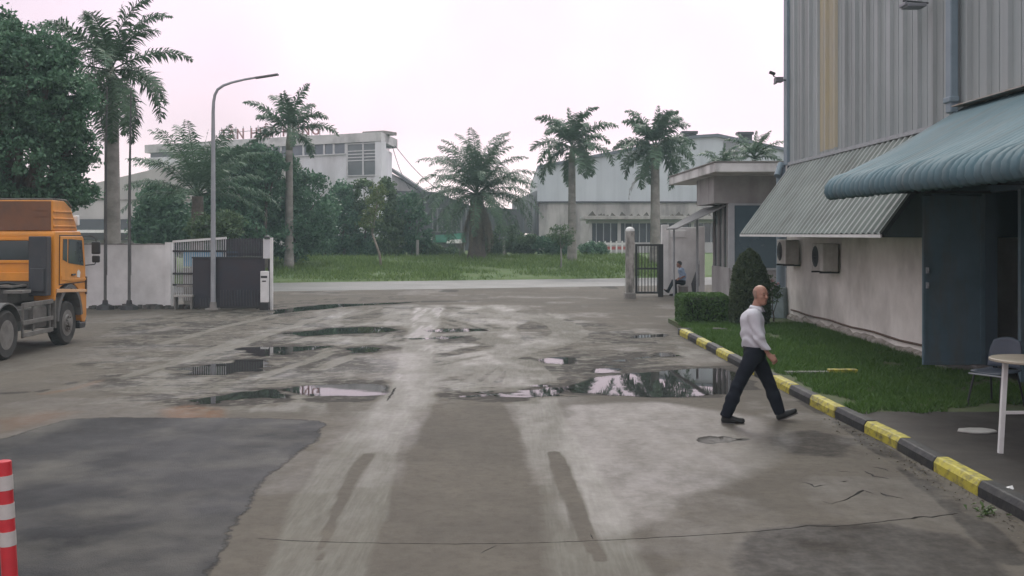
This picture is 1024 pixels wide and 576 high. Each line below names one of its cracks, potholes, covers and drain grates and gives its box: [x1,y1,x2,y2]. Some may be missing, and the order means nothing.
crack [803,467,899,504]
pothole [696,436,750,444]
